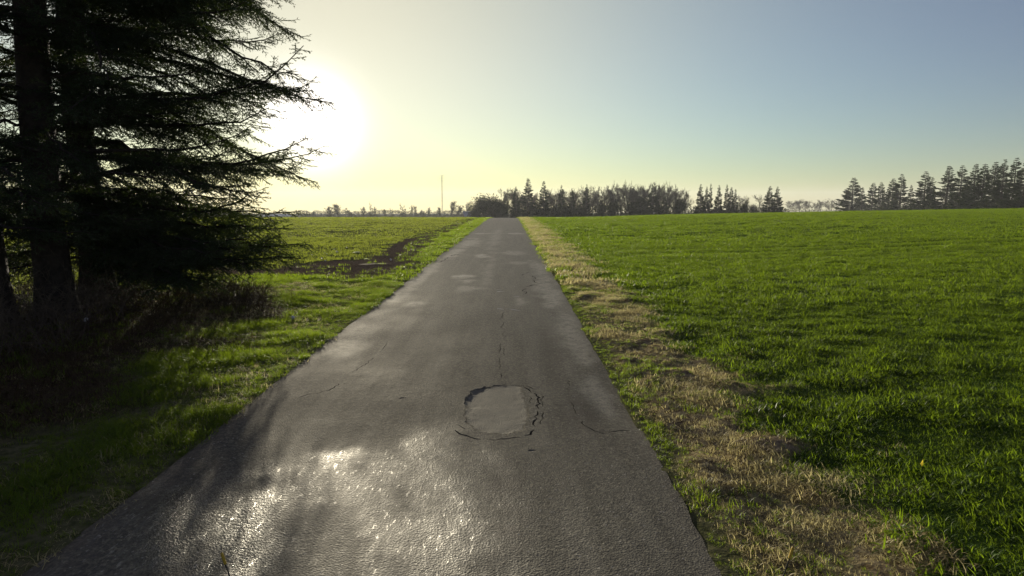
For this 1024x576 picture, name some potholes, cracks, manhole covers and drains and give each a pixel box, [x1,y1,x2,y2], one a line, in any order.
crack [497,274,538,378]
pothole [463,384,530,436]
